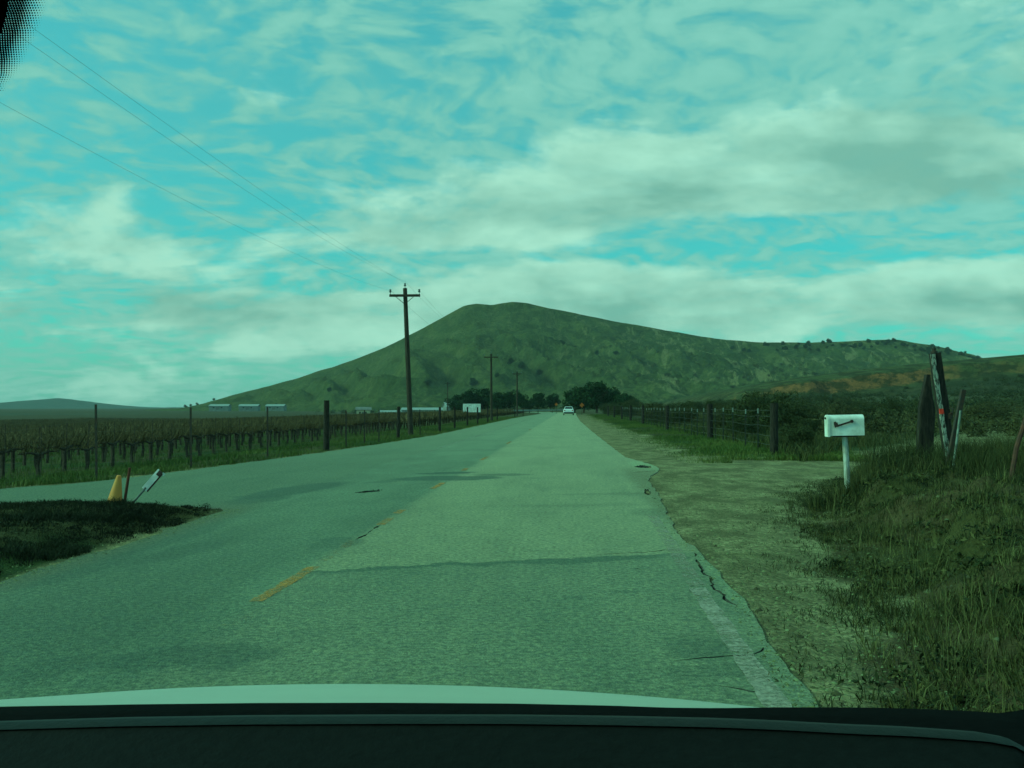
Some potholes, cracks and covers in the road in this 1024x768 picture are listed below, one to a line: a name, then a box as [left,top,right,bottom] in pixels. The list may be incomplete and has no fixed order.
crack [610,550,738,607]
crack [675,648,764,661]
